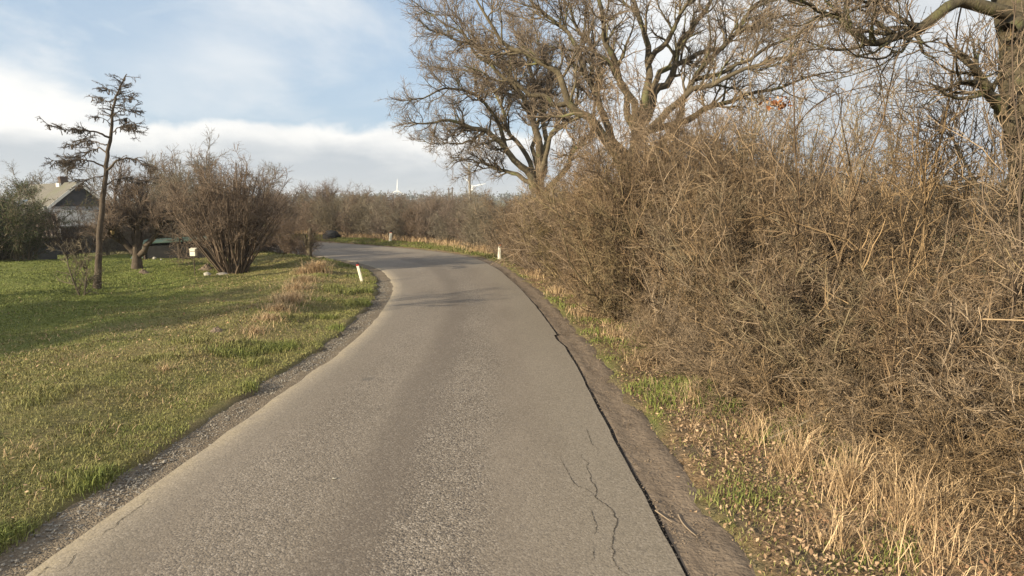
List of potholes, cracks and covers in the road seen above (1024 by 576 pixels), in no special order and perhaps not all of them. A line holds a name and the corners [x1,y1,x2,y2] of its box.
crack [504,274,689,576]
